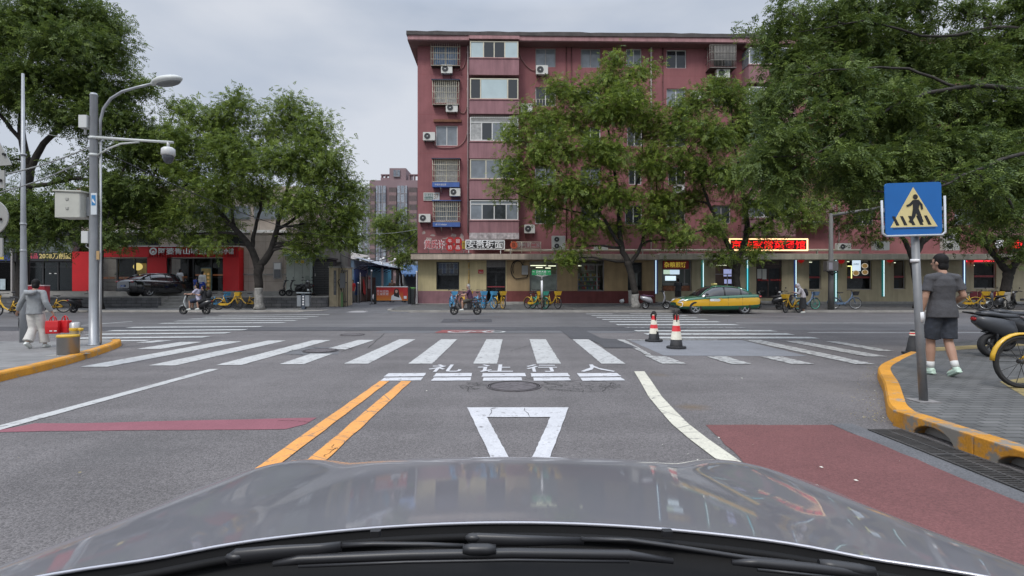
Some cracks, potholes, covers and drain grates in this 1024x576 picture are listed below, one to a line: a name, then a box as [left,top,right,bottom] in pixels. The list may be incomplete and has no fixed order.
manhole cover [486,381,541,392]
